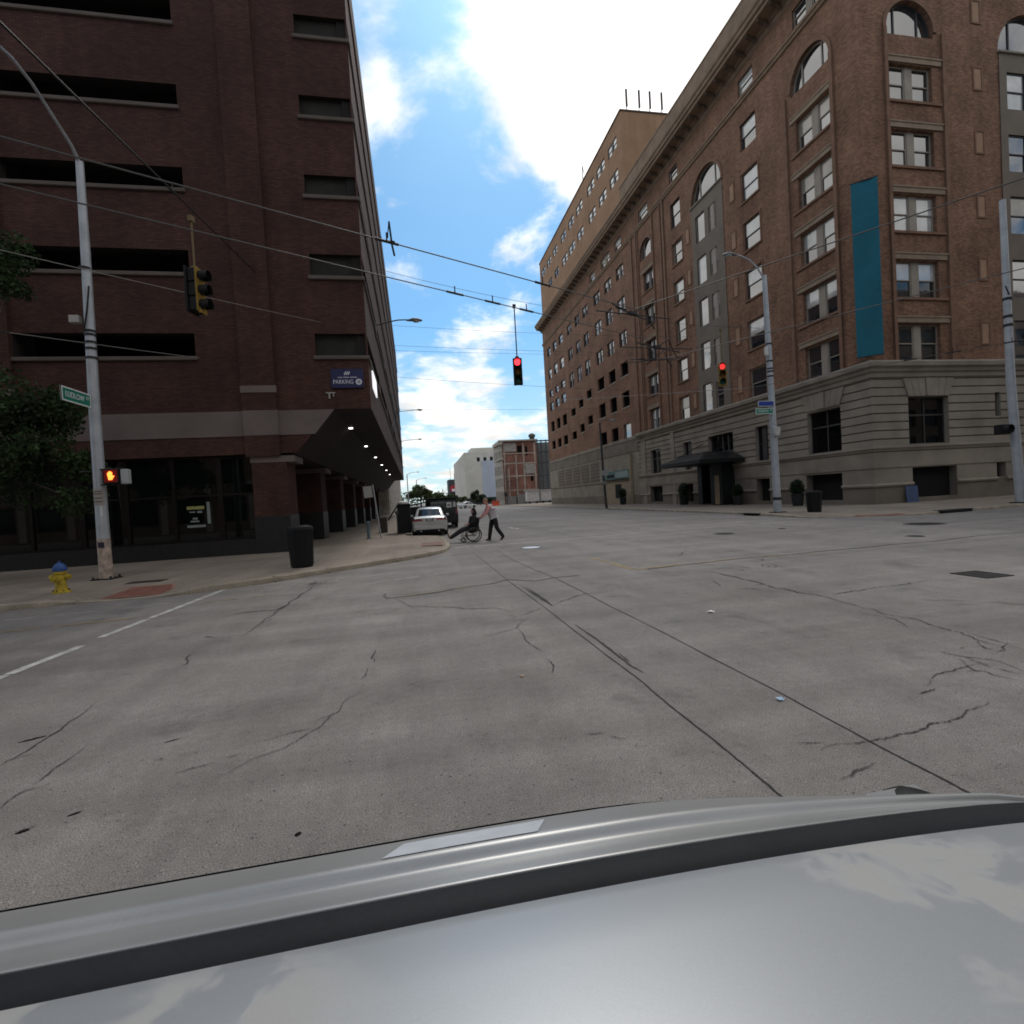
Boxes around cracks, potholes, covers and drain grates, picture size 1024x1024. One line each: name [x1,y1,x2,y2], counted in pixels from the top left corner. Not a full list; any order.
crack [673,549,1023,694]
crack [155,649,376,778]
crack [0,703,95,805]
crack [384,586,615,672]
crack [248,580,316,632]
crack [797,701,989,750]
manhole cover [949,570,1014,578]
